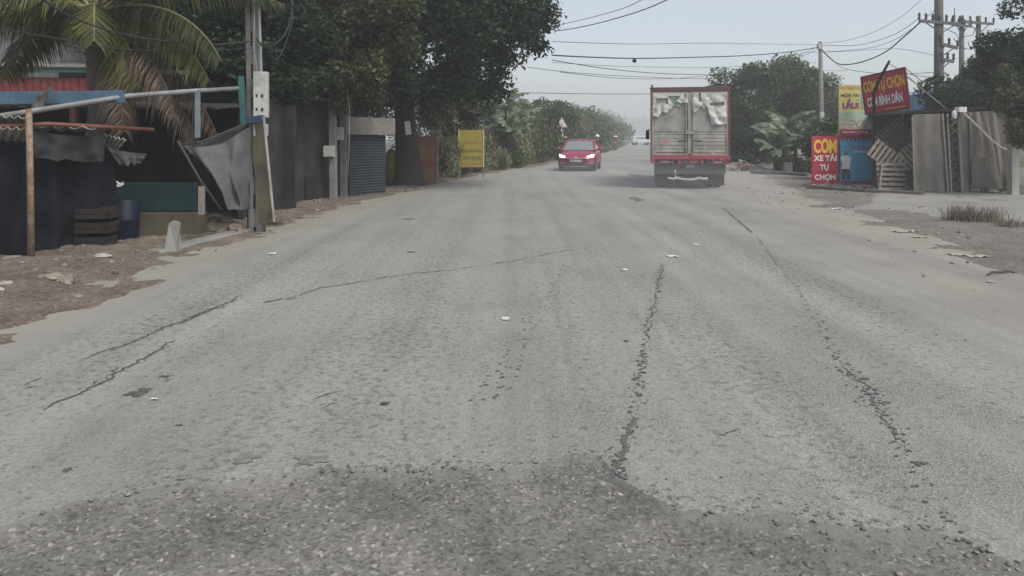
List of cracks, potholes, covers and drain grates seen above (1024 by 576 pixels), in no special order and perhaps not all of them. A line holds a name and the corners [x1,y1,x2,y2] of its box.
crack [608,207,972,548]
crack [22,294,241,410]
pothole [123,387,152,397]
